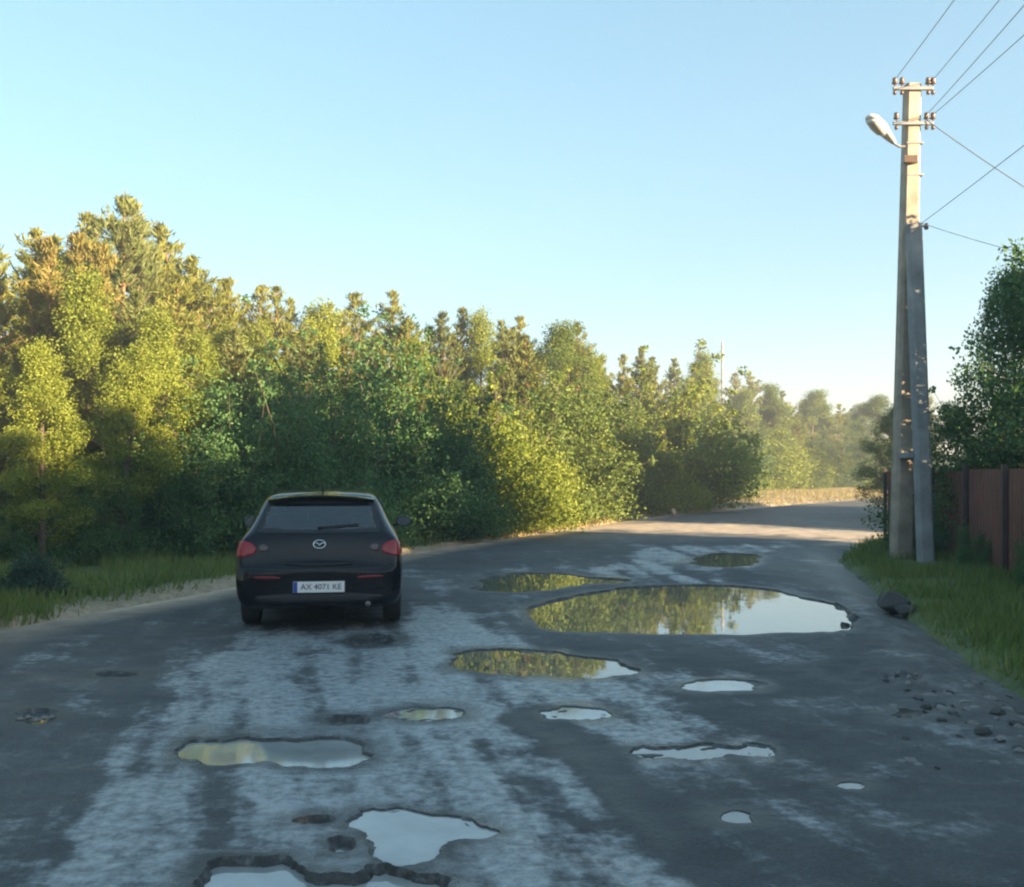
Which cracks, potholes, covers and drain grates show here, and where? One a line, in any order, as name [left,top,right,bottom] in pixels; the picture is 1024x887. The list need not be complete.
pothole [538,705,613,720]
pothole [173,736,374,768]
pothole [380,707,466,721]
pothole [447,648,641,679]
pothole [292,815,336,824]
pothole [836,781,866,789]
pothole [470,572,632,592]
pothole [327,835,357,852]
pothole [193,854,452,887]
pothole [689,553,763,567]
pothole [12,707,58,724]
pothole [720,810,754,823]
